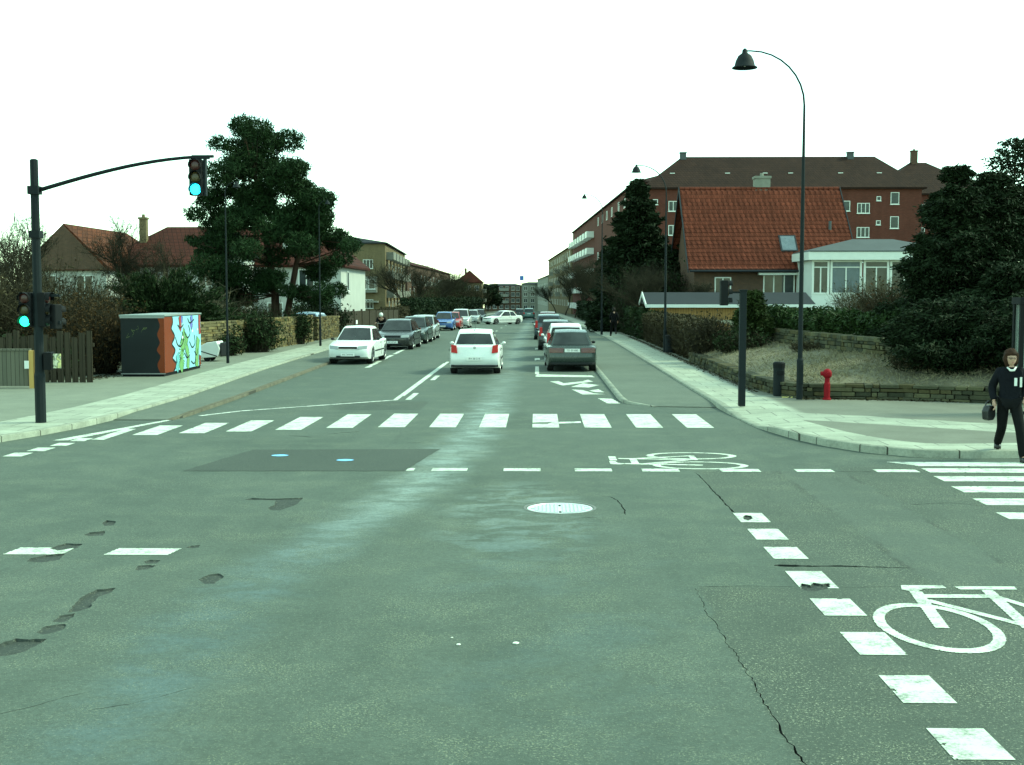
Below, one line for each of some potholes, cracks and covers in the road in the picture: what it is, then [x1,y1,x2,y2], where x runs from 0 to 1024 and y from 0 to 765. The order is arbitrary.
pothole [246,498,302,510]
pothole [198,573,224,584]
pothole [51,543,82,551]
pothole [53,613,75,622]
pothole [28,554,64,563]
manhole cover [524,501,596,514]
pothole [37,624,66,634]
crack [695,586,807,765]
pothole [0,638,46,656]
pothole [800,583,830,591]
crack [694,472,735,513]
pothole [68,588,115,613]
